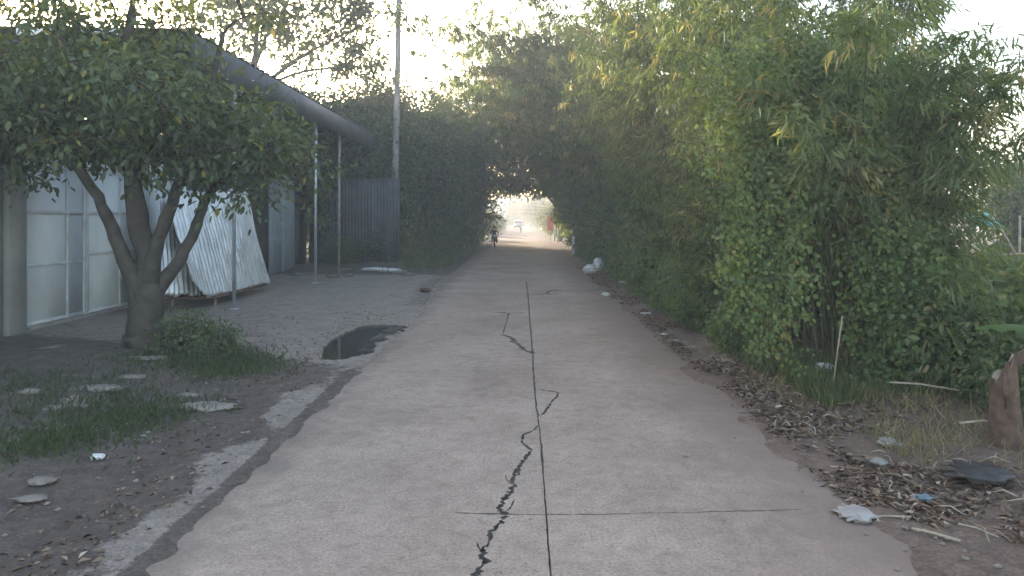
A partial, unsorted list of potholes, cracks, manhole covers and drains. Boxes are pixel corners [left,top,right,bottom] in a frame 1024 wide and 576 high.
pothole [311,324,413,364]
crack [453,389,804,576]
crack [496,312,535,353]
